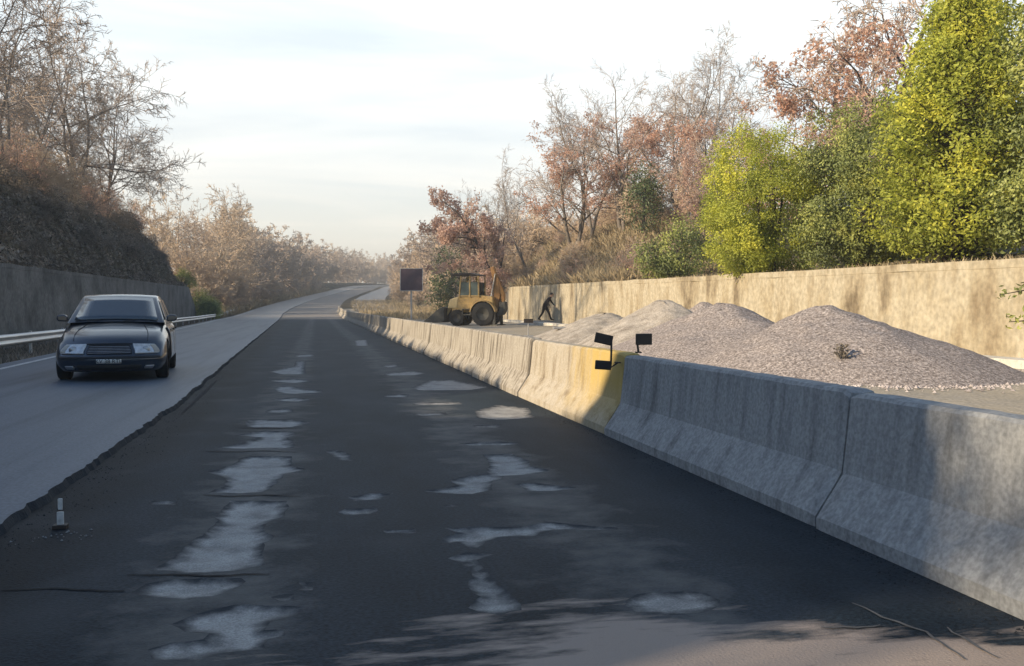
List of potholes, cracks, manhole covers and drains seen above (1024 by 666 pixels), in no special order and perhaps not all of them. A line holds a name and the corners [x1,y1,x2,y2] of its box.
pothole [218,431,296,449]
pothole [148,605,307,661]
pothole [206,456,305,493]
pothole [441,522,618,548]
crack [1,573,255,591]
pothole [132,578,246,600]
pothole [625,591,720,615]
pothole [425,454,548,494]
pothole [448,552,522,615]
pothole [412,380,488,390]
pothole [475,405,534,420]
pothole [152,501,289,573]
